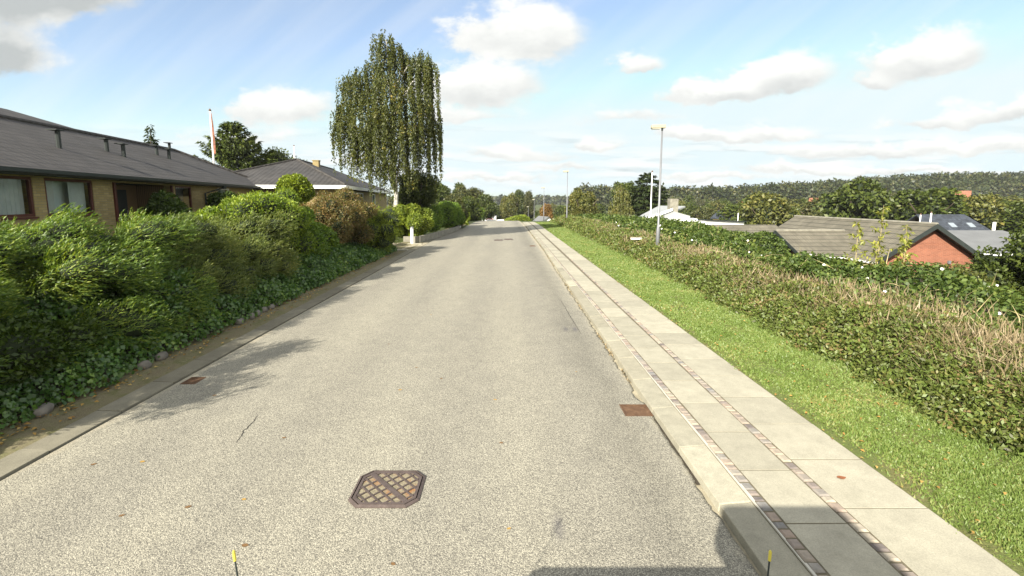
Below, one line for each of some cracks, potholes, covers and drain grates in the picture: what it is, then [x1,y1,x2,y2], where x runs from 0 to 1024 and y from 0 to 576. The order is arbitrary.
drain grate [619,404,653,416]
